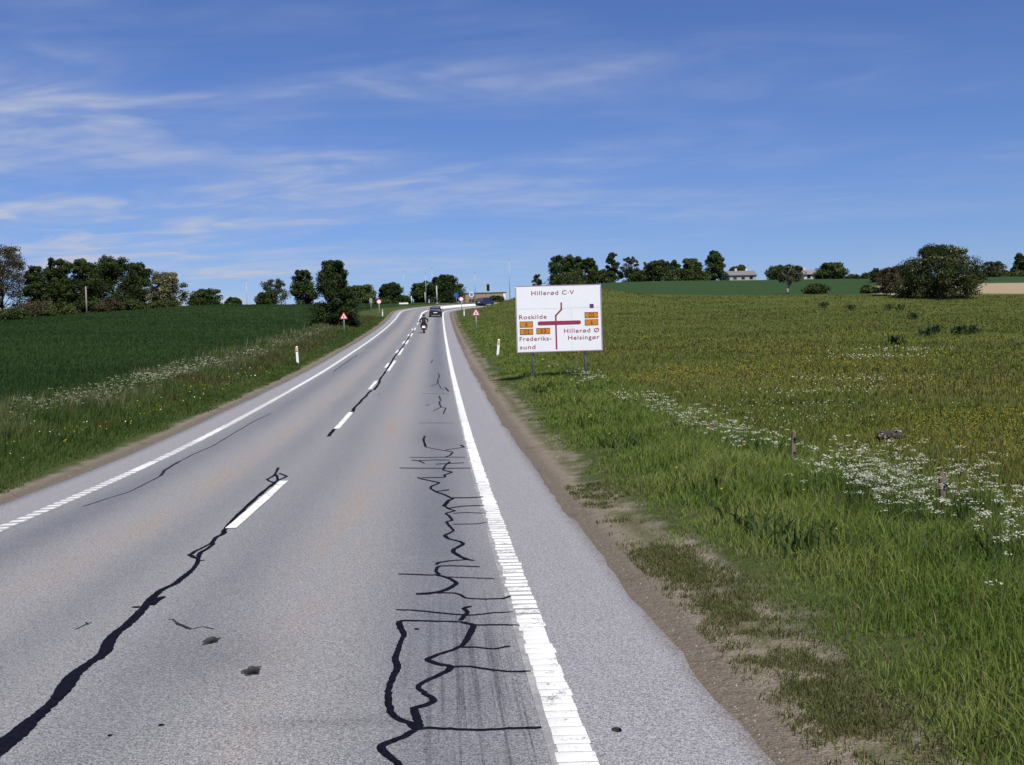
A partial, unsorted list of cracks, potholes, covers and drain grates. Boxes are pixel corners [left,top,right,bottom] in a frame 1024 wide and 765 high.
pothole [202,636,221,646]
pothole [241,666,261,676]
crack [168,619,213,630]
crack [82,413,271,507]
